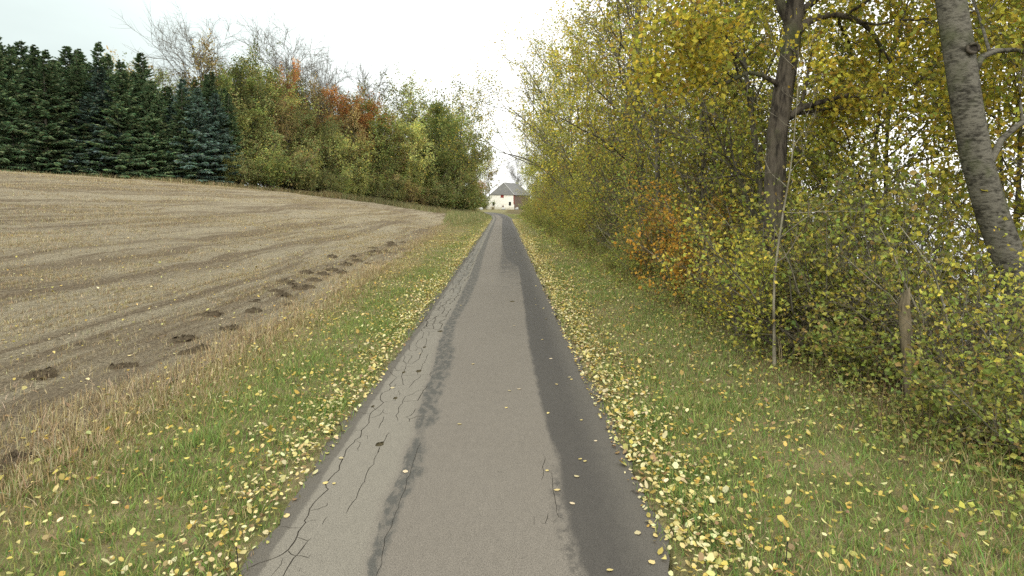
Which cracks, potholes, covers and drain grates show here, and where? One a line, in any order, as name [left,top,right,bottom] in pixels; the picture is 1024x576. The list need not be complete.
crack [249,248,479,576]
